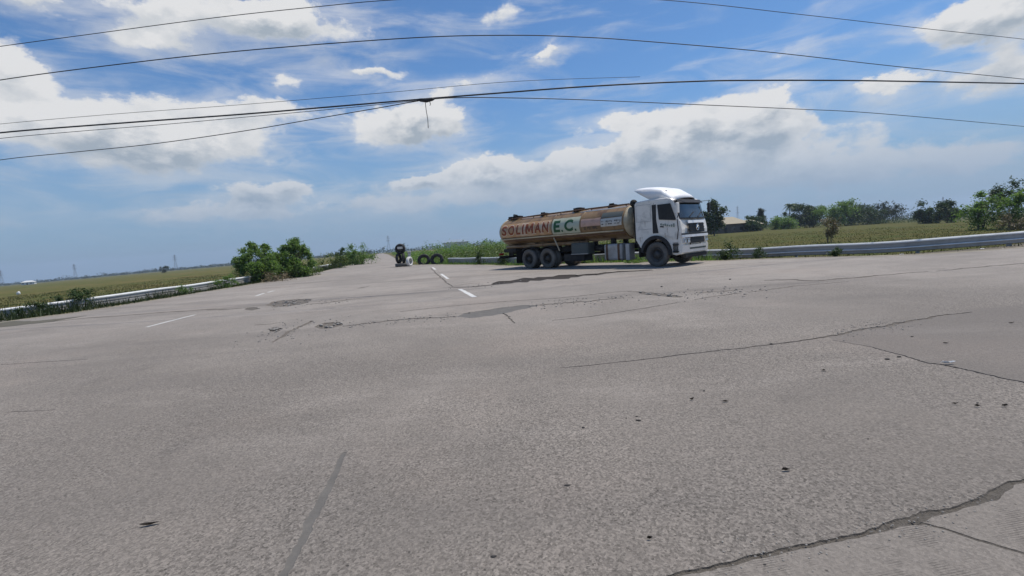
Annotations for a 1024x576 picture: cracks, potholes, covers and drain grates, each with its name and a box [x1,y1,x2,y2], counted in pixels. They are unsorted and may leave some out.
crack [342,268,916,327]
crack [564,312,1024,383]
crack [667,479,1024,576]
pothole [267,299,311,307]
crack [261,286,368,342]
